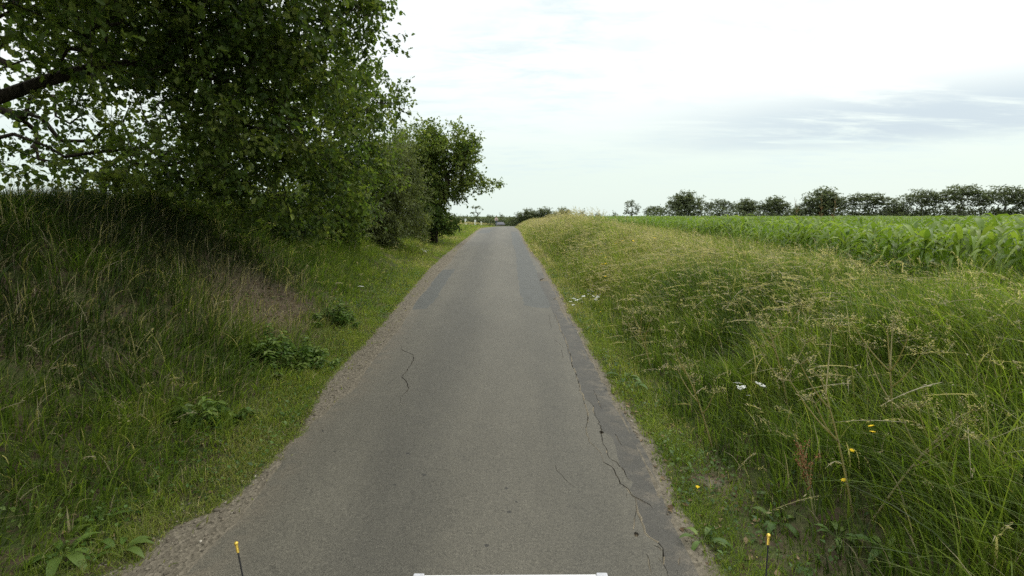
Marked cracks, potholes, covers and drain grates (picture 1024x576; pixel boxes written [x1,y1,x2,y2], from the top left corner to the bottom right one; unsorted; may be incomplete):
crack [549,312,680,574]
